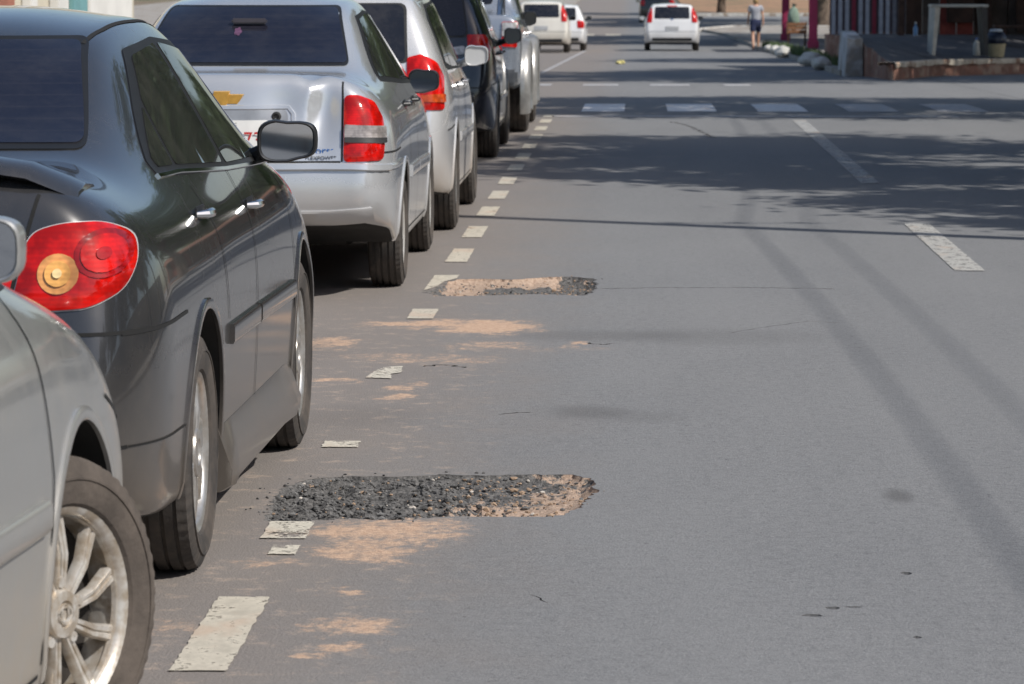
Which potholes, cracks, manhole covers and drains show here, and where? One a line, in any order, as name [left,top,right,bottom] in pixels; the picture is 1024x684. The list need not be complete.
pothole [422,276,598,296]
pothole [245,471,600,523]
